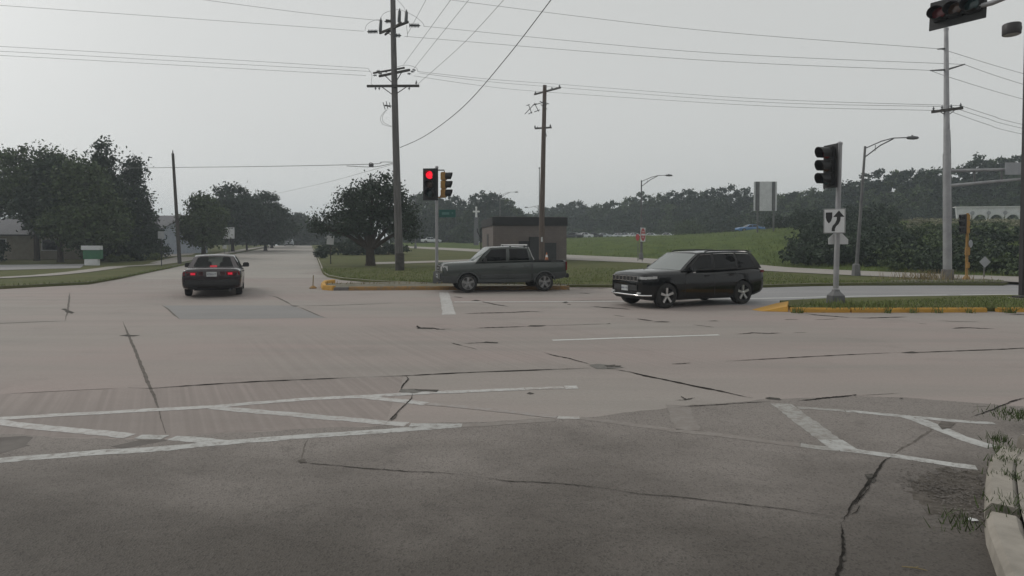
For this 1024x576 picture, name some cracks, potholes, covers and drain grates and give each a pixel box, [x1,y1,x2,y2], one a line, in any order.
crack [373,353,589,417]
crack [461,297,624,326]
crack [835,429,955,576]
crack [293,440,591,487]
